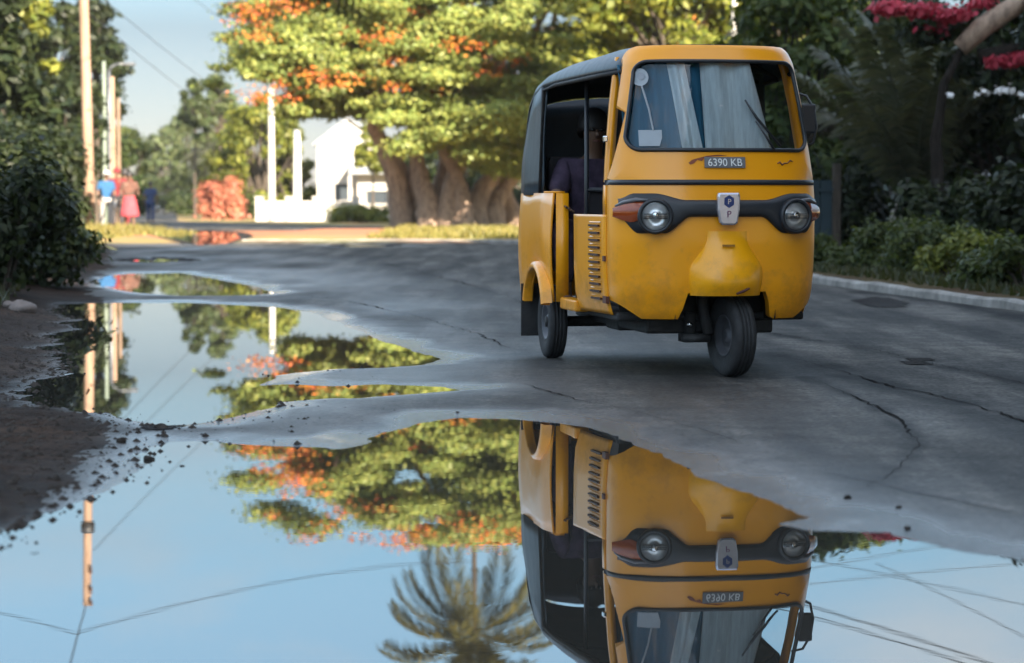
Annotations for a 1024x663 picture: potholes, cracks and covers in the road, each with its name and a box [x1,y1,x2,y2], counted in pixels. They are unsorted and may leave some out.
crack [770,354,1024,485]
crack [288,293,510,348]
